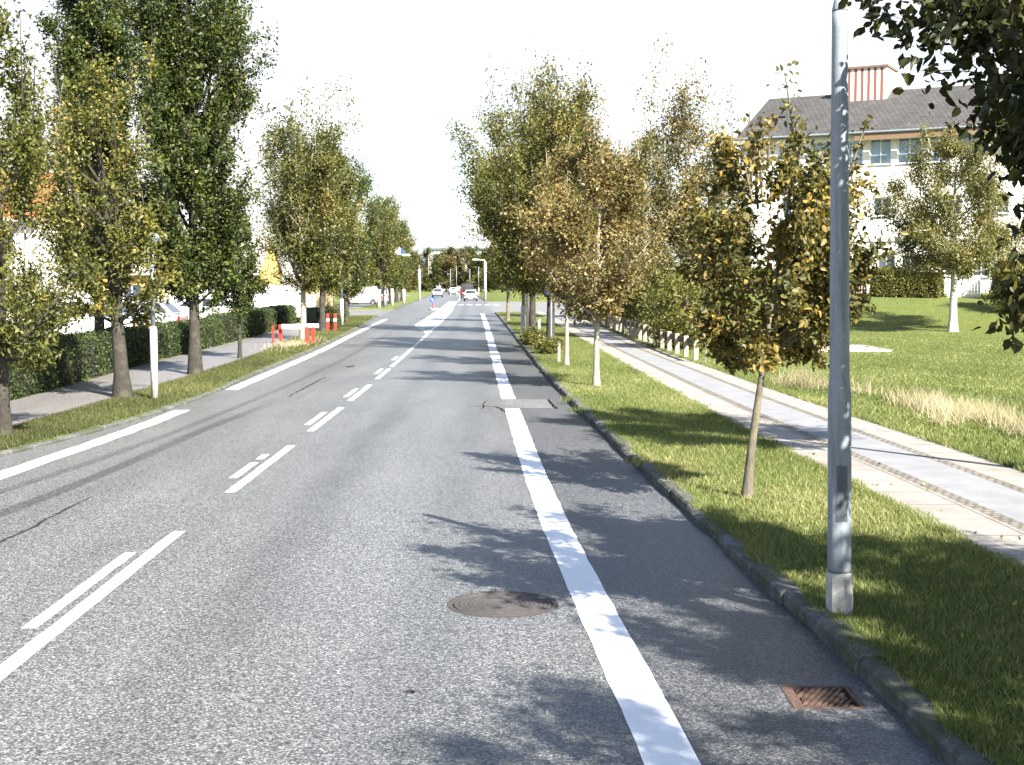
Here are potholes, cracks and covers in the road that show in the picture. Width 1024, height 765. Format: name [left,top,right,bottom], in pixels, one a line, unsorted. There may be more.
manhole cover [447,591,558,618]
crack [0,496,93,543]
crack [481,400,506,413]
drain grate [780,686,867,709]
